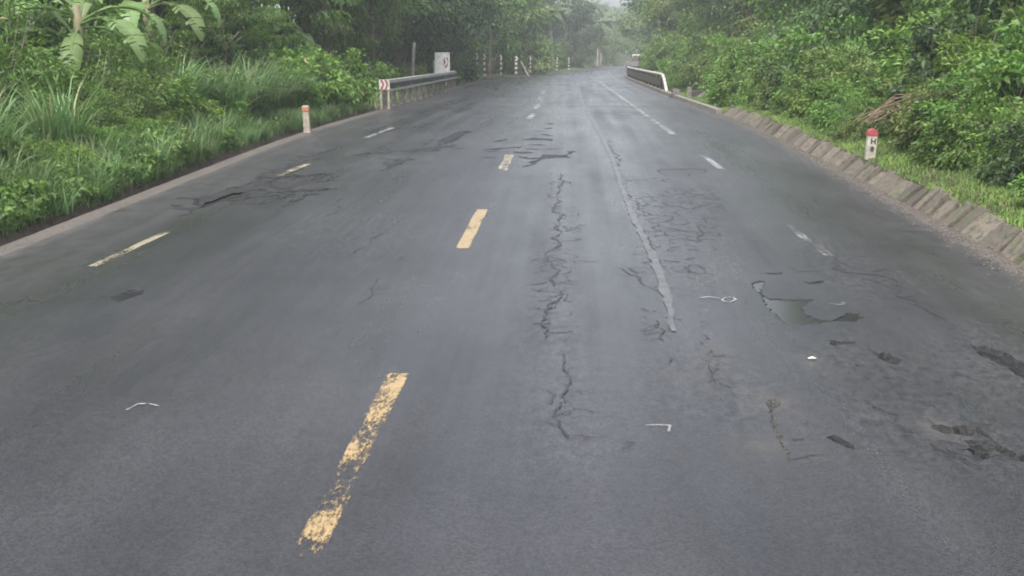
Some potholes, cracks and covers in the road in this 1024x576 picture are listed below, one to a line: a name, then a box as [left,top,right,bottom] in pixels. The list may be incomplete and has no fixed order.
pothole [971,345,1024,379]
crack [482,123,637,449]
pothole [877,352,902,365]
crack [170,123,456,216]
pothole [964,439,1024,462]
pothole [826,435,855,449]
crack [607,140,725,363]
pothole [931,424,990,438]
pothole [751,281,864,325]
